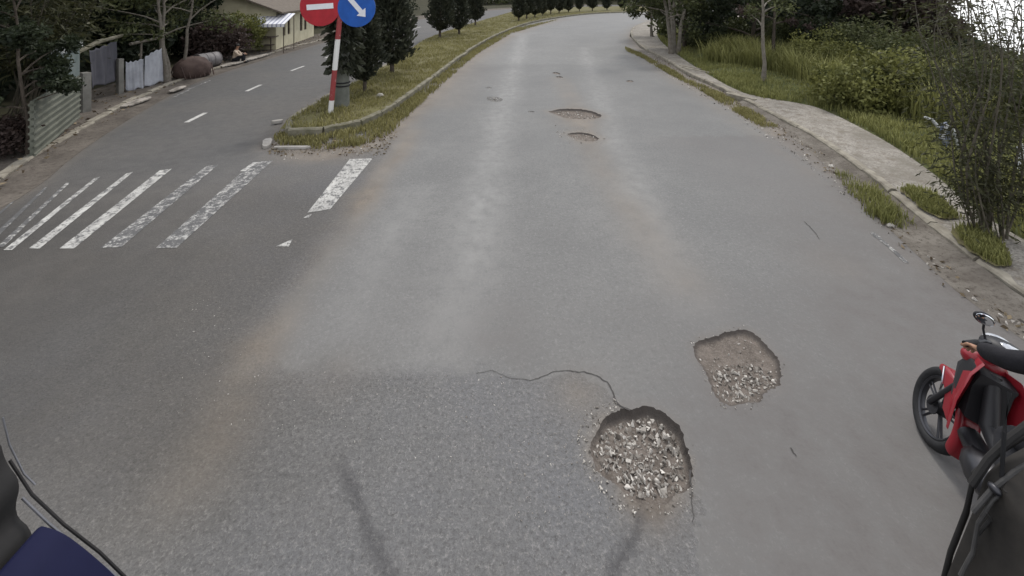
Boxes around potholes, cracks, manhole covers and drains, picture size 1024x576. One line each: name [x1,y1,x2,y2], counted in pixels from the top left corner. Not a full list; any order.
pothole [549,109,602,119]
pothole [693,329,782,406]
pothole [590,406,693,505]
crack [478,370,630,410]
pothole [567,132,599,142]
